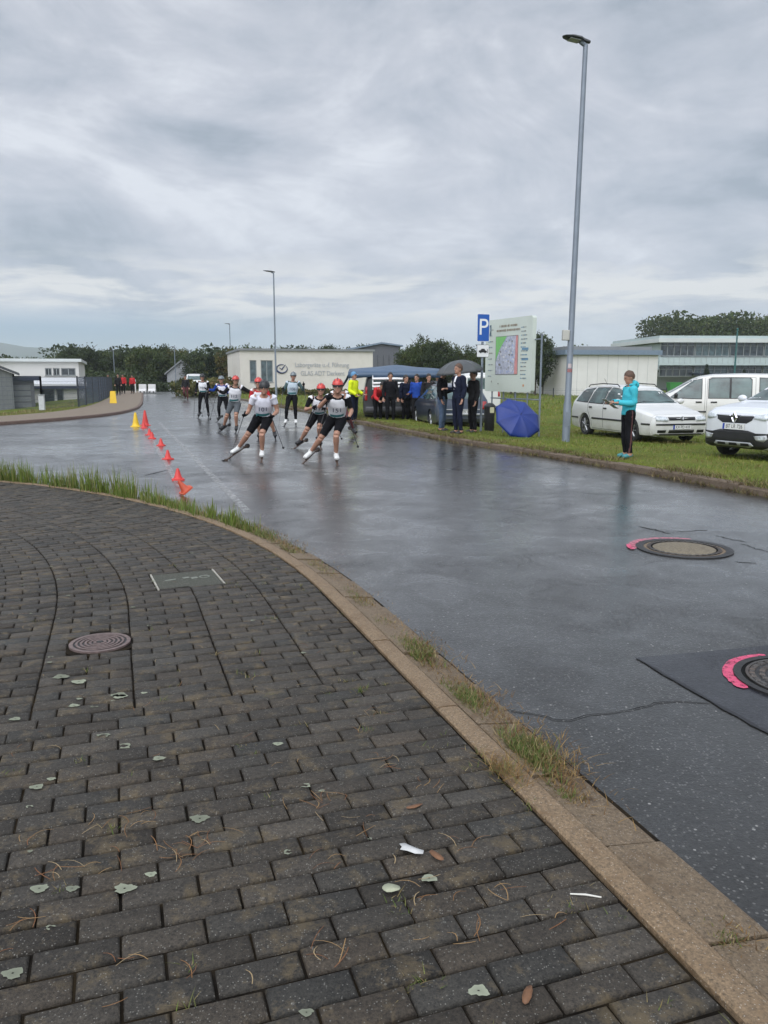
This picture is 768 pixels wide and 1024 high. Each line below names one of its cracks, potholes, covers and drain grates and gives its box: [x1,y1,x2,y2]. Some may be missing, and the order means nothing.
manhole cover [62,632,133,658]
crack [507,700,710,721]
manhole cover [636,539,734,559]
manhole cover [733,655,768,696]
crack [638,526,768,563]
